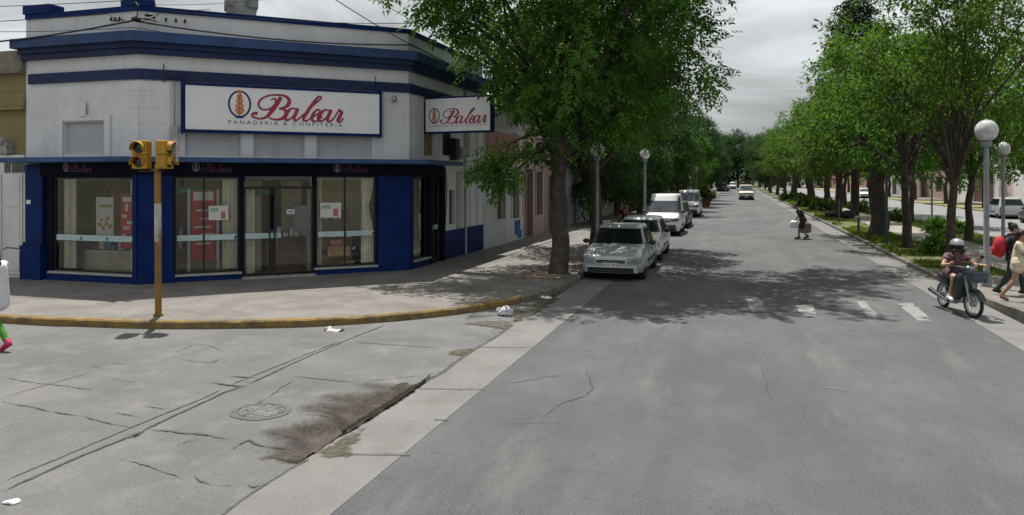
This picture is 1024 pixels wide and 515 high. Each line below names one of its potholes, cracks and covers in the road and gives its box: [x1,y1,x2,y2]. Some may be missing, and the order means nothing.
manhole cover [229,402,292,420]
crack [5,377,89,389]
crack [120,458,258,487]
crack [506,371,593,424]
crack [8,402,288,457]
